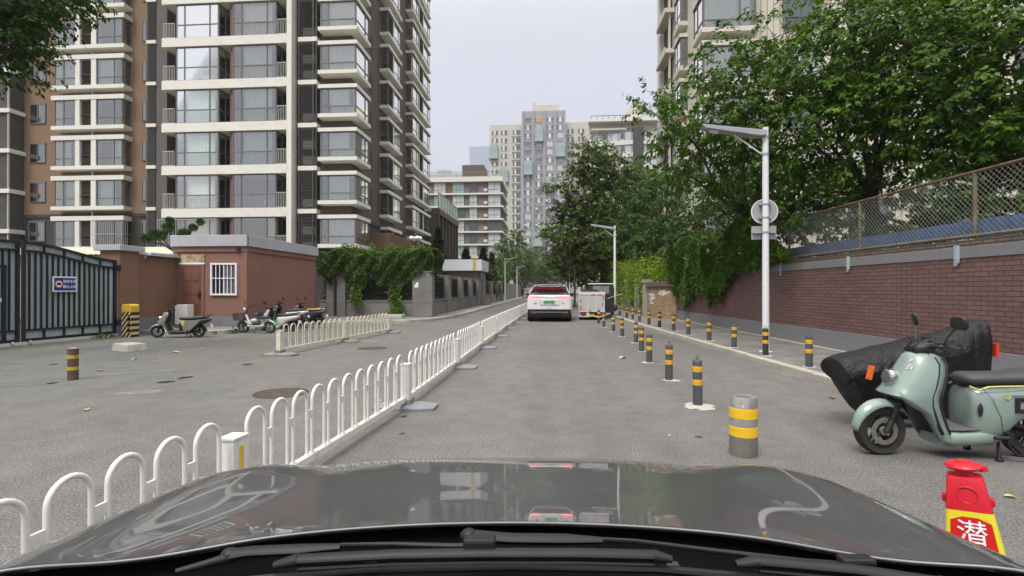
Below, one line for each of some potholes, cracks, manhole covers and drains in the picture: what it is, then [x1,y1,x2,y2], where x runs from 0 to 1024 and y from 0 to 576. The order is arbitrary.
manhole cover [252,388,309,399]
